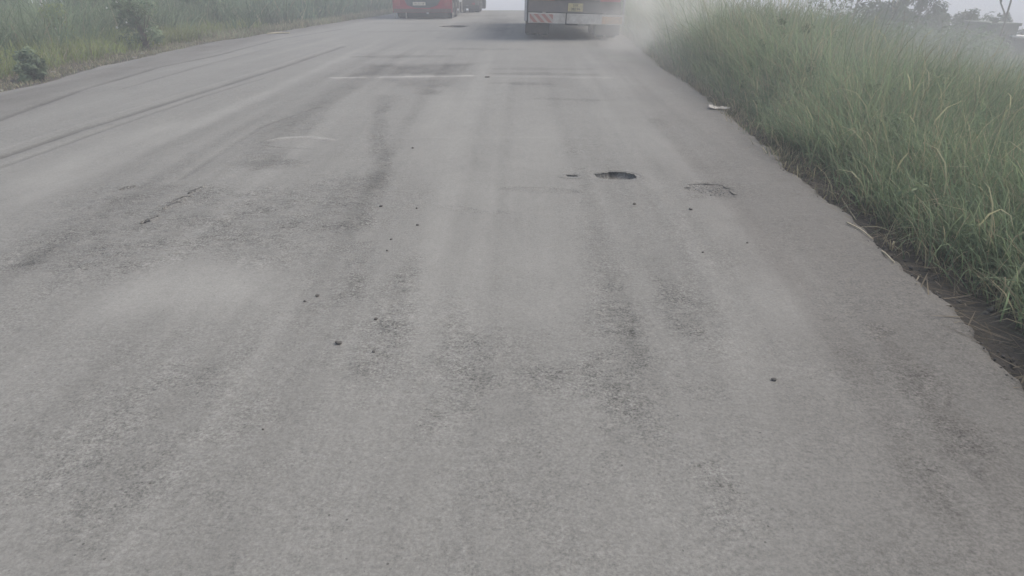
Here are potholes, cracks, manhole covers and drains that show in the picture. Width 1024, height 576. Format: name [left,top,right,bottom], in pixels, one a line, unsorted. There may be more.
pothole [586,170,646,182]
pothole [678,182,742,199]
crack [119,185,205,224]
